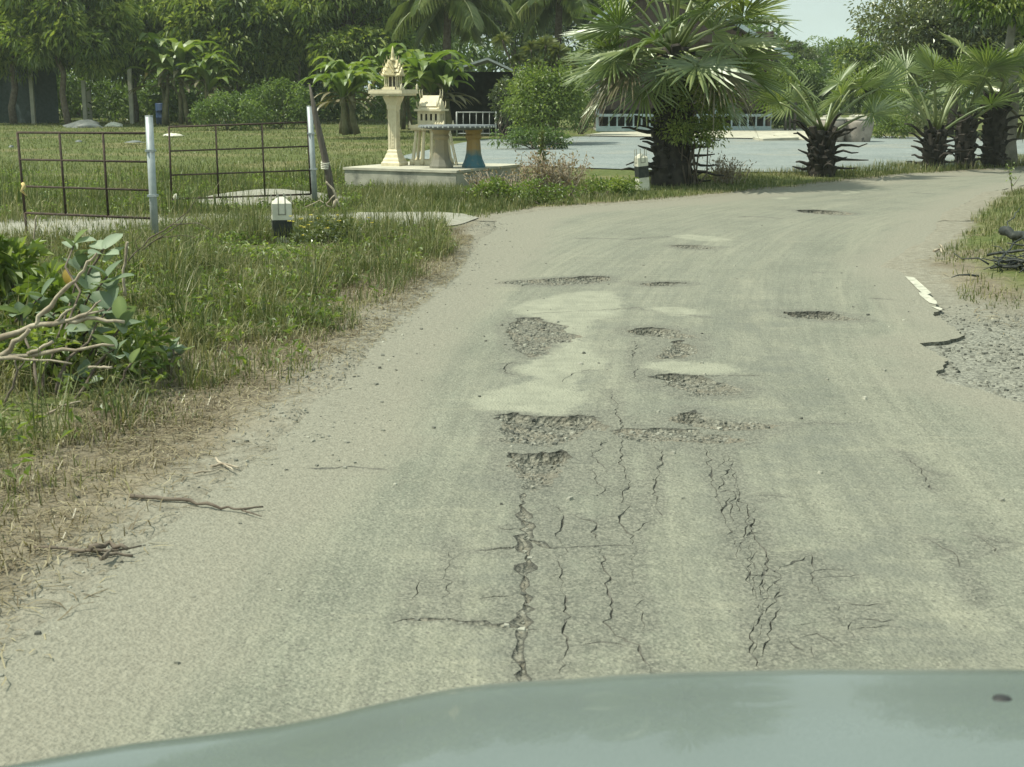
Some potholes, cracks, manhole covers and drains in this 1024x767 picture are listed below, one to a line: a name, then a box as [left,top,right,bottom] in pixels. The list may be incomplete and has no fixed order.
pothole [626,327,699,339]
crack [705,447,893,670]
pothole [655,340,698,359]
pothole [495,276,612,286]
pothole [647,373,744,397]
pothole [505,317,583,358]
crack [393,388,664,682]
pothole [506,449,573,492]
pothole [667,409,778,431]
pothole [783,311,860,321]
pothole [493,412,611,447]
